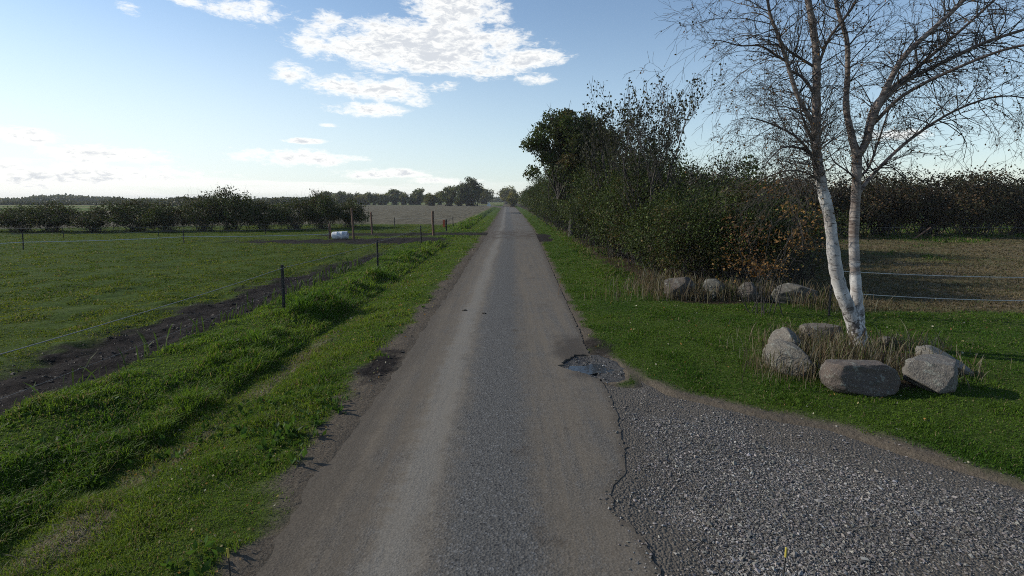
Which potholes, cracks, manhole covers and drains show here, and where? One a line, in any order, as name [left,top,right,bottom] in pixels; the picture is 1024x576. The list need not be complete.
pothole [560,355,625,383]
